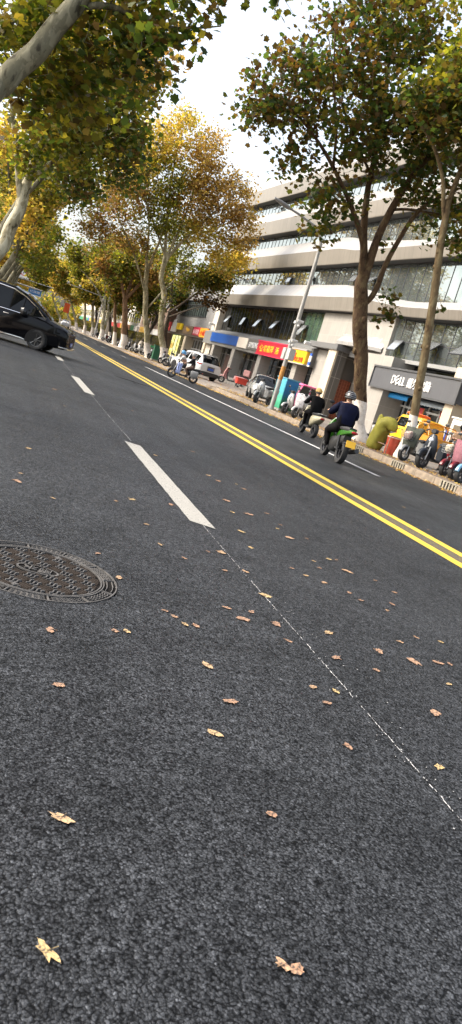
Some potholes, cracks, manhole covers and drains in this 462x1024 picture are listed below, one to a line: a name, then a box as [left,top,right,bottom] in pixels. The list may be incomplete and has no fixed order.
drain grate [438,479,461,493]
manhole cover [0,540,117,604]
